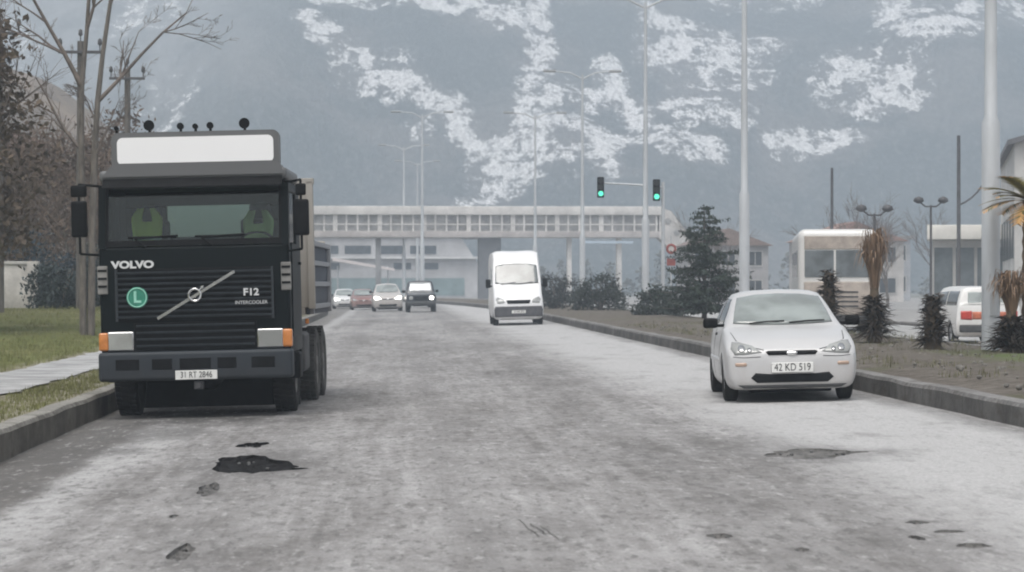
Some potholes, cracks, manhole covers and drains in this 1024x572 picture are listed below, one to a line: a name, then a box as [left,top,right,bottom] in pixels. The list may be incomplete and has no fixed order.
pothole [764,448,870,459]
crack [519,519,560,540]
pothole [212,455,310,474]
pothole [196,482,220,497]
pothole [165,543,196,561]
